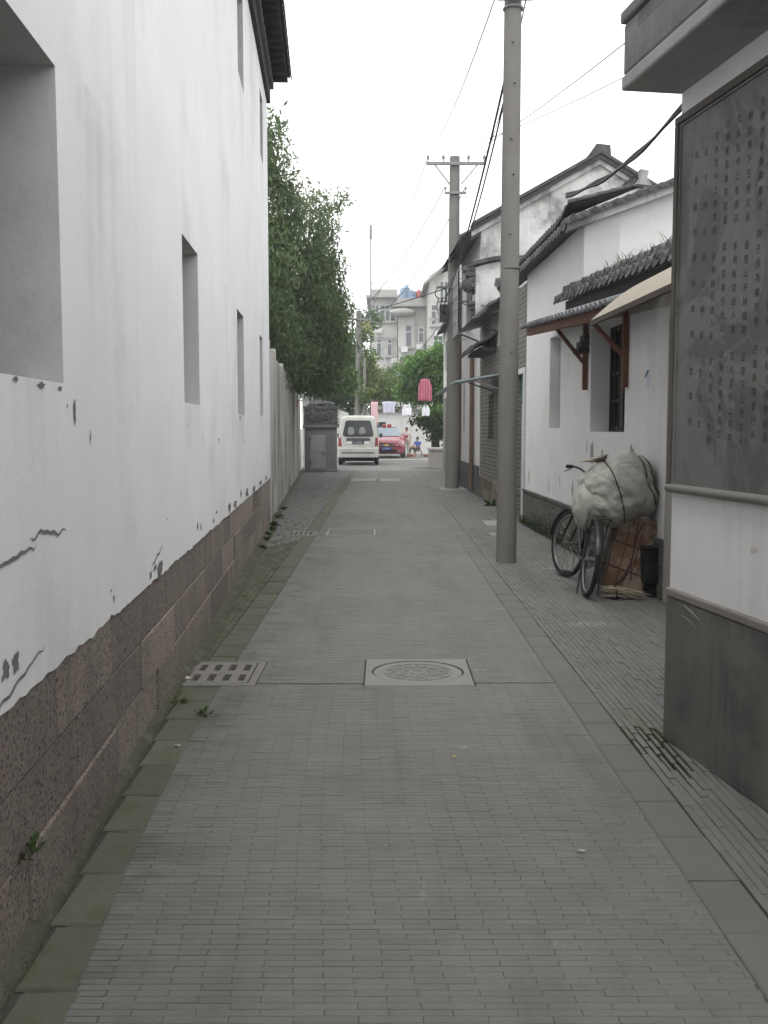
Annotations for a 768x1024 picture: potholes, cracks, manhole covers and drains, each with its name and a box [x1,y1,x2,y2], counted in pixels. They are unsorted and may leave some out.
drain grate [182,662,267,687]
manhole cover [364,659,475,687]
